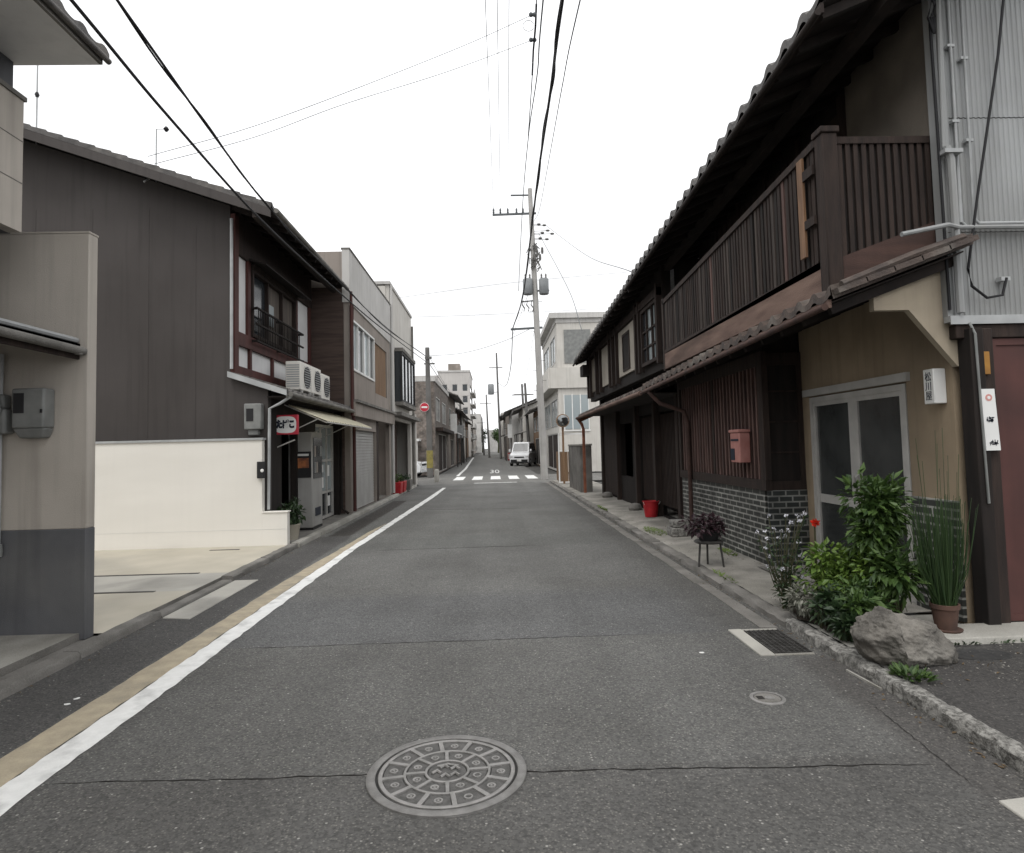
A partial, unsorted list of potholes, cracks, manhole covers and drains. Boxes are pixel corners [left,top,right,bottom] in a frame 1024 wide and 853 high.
crack [56,764,908,784]
drain grate [728,628,815,656]
manhole cover [749,691,786,705]
crack [869,702,973,786]
manhole cover [366,735,527,819]
